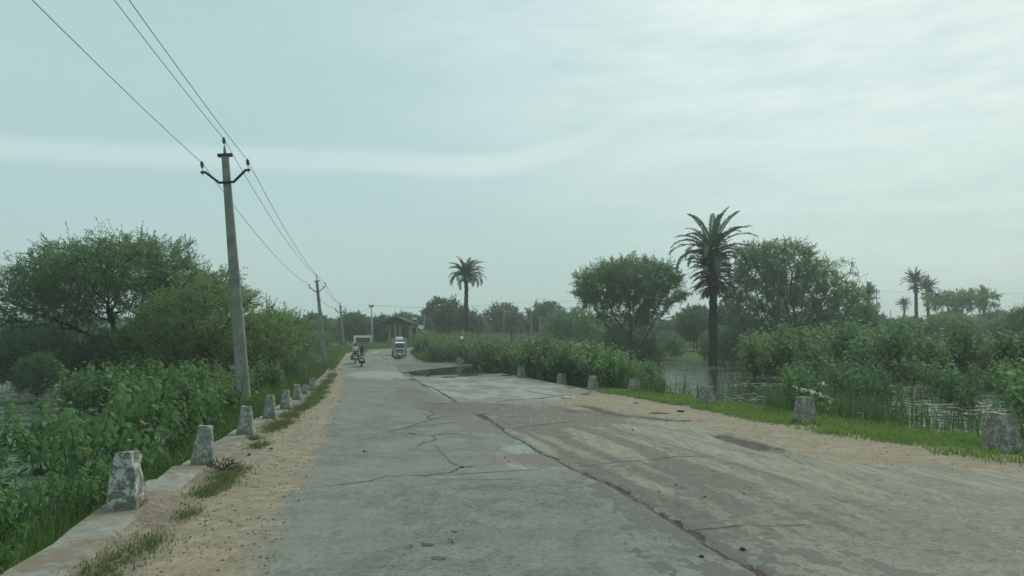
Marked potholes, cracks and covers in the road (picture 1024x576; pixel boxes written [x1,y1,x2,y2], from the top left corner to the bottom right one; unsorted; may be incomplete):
crack [319,391,591,487]
crack [683,524,817,532]
